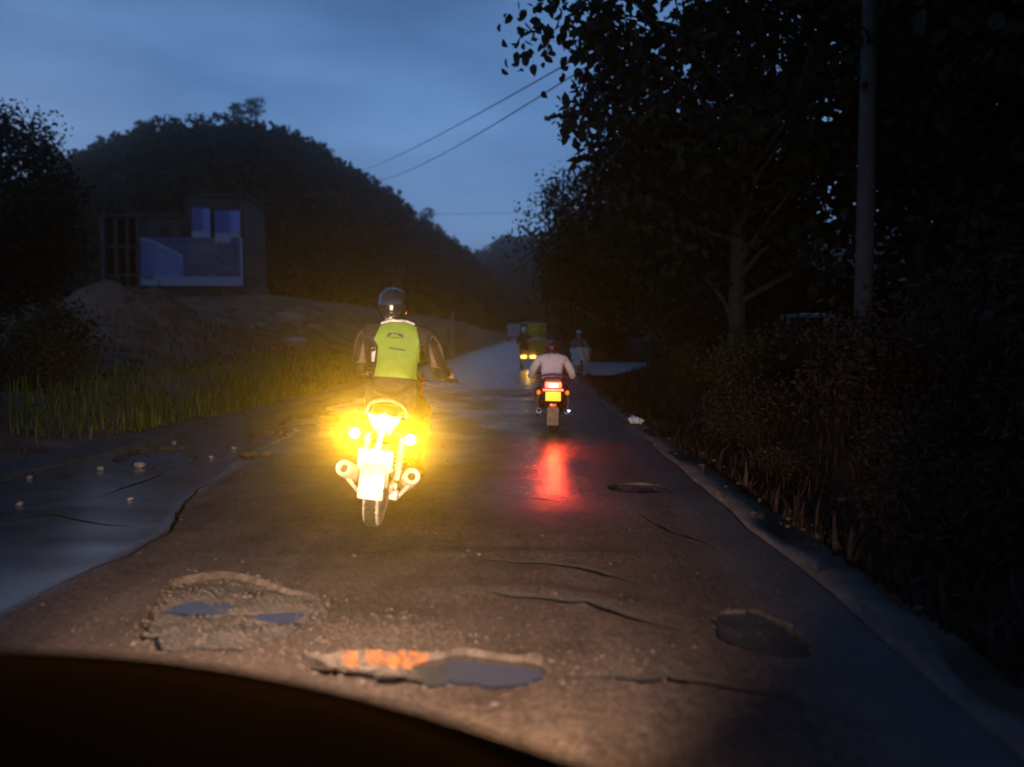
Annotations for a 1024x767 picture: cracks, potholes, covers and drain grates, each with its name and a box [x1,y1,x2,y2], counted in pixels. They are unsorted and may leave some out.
manhole cover [607,482,670,493]
pothole [298,647,566,689]
crack [463,513,721,632]
pothole [711,607,813,658]
pothole [131,570,331,657]
crack [3,472,224,616]
crack [579,671,801,702]
